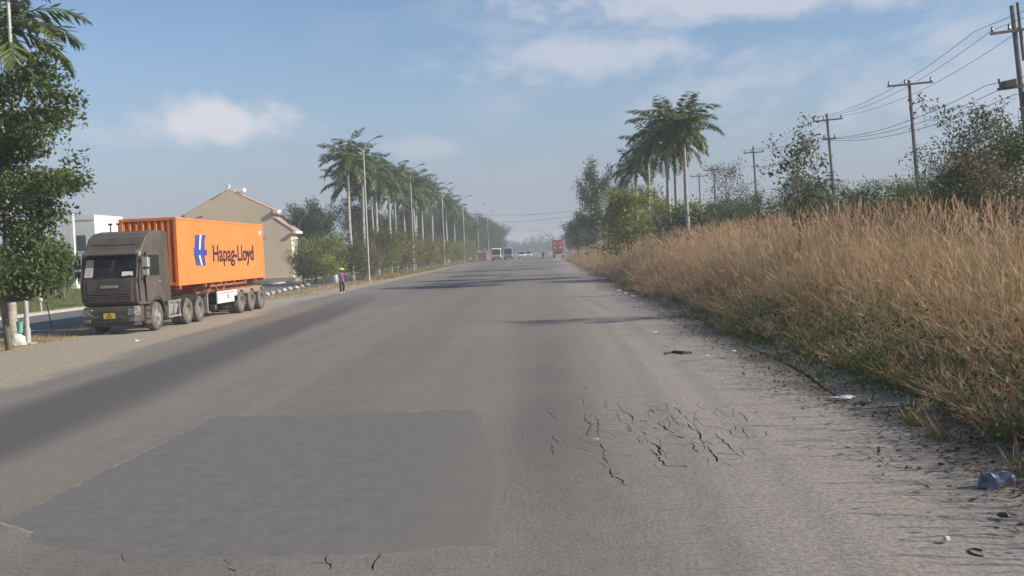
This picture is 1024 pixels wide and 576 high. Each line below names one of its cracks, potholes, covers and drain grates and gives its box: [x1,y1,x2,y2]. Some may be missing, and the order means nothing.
crack [549,386,772,486]
crack [224,555,332,572]
